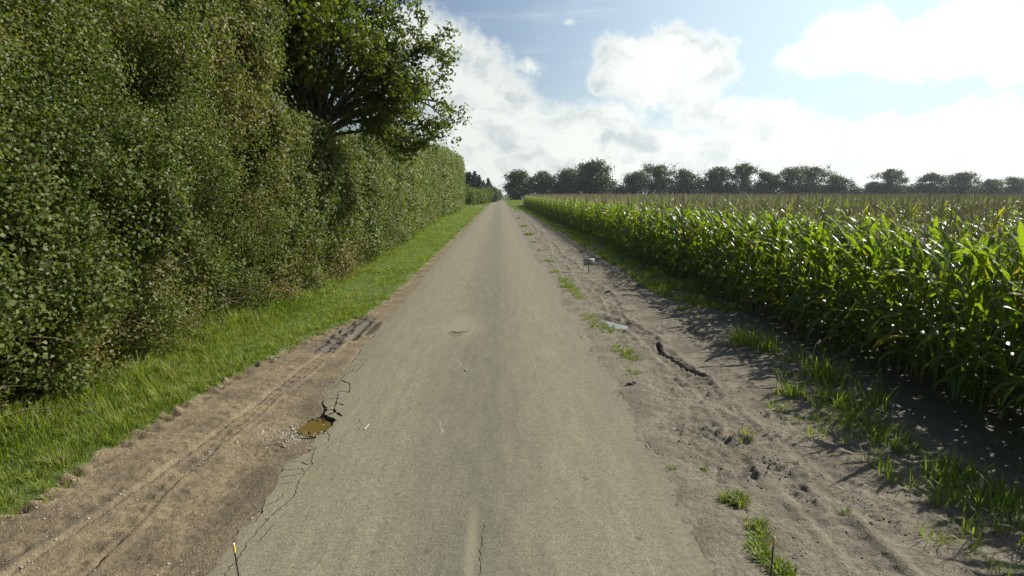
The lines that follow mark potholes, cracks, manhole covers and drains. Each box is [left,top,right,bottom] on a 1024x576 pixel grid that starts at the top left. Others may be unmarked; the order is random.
pothole [298,417,334,438]
crack [224,336,374,576]
